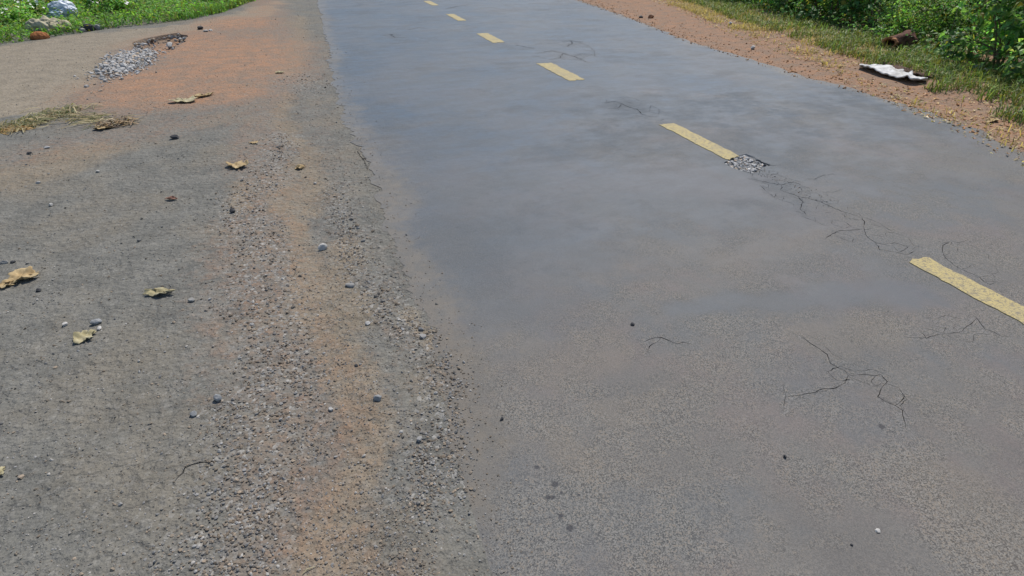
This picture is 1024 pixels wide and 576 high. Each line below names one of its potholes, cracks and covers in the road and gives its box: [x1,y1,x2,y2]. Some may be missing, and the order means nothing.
crack [752,160,919,255]
crack [910,316,1009,342]
crack [783,338,908,428]
crack [942,240,998,285]
